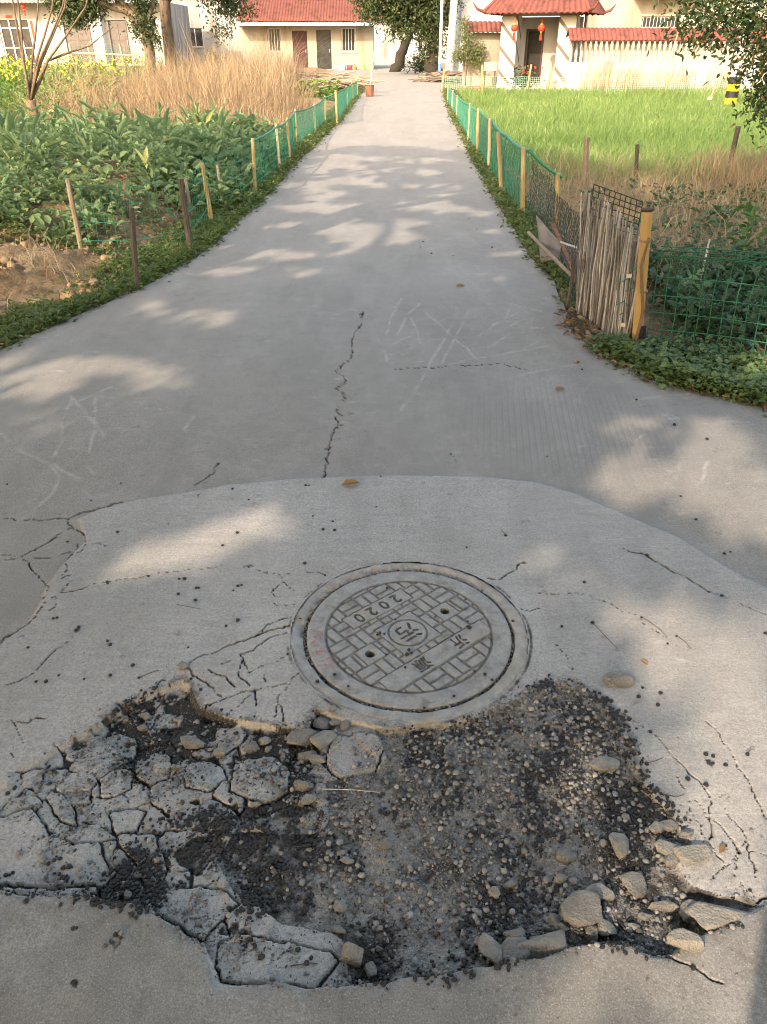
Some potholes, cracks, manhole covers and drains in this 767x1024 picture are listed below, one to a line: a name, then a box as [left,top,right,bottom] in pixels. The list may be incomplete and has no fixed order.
pothole [0,680,759,989]
crack [320,311,365,478]
manhole cover [290,562,529,723]
crack [0,501,327,722]
crack [486,547,767,642]
crack [622,712,767,904]
